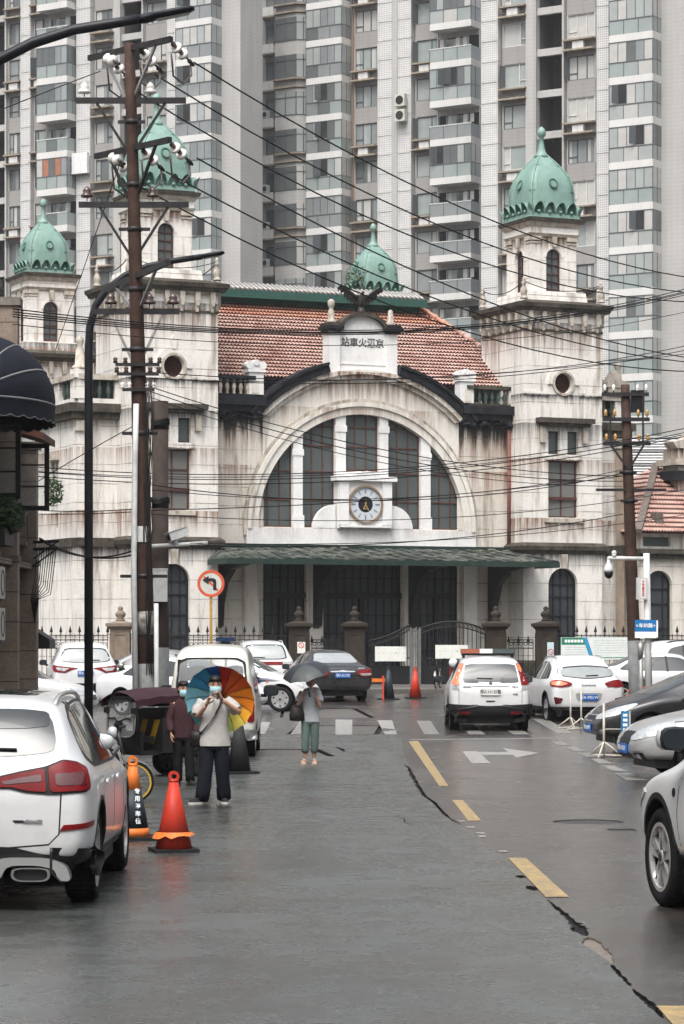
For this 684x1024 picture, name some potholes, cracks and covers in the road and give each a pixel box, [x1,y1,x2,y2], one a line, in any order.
crack [611,965,664,1018]
pothole [582,937,614,964]
crack [397,765,461,831]
